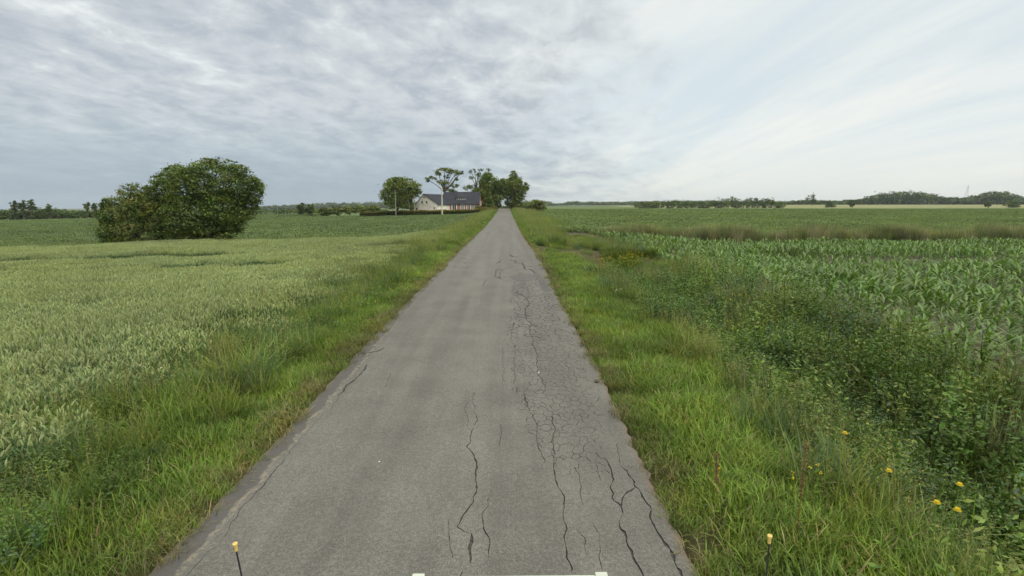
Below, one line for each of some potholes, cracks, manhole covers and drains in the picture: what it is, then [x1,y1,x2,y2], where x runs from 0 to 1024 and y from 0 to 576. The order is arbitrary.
crack [188,348,383,574]
crack [448,392,490,576]
crack [483,255,683,576]
